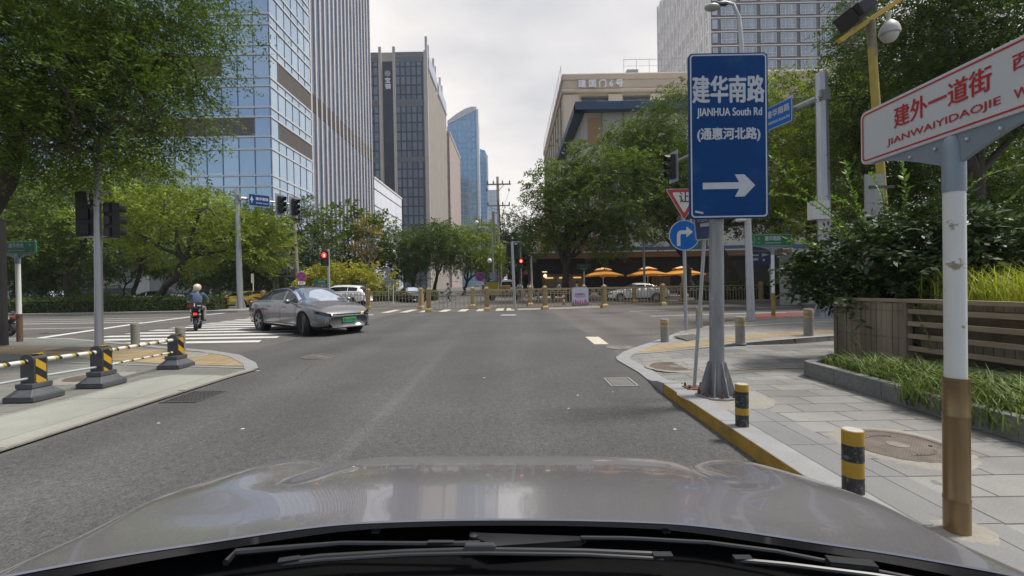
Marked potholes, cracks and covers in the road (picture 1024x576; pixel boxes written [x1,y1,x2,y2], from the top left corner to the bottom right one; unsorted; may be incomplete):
drain grate [159,390,226,403]
manhole cover [644,362,694,373]
drain grate [603,377,639,387]
